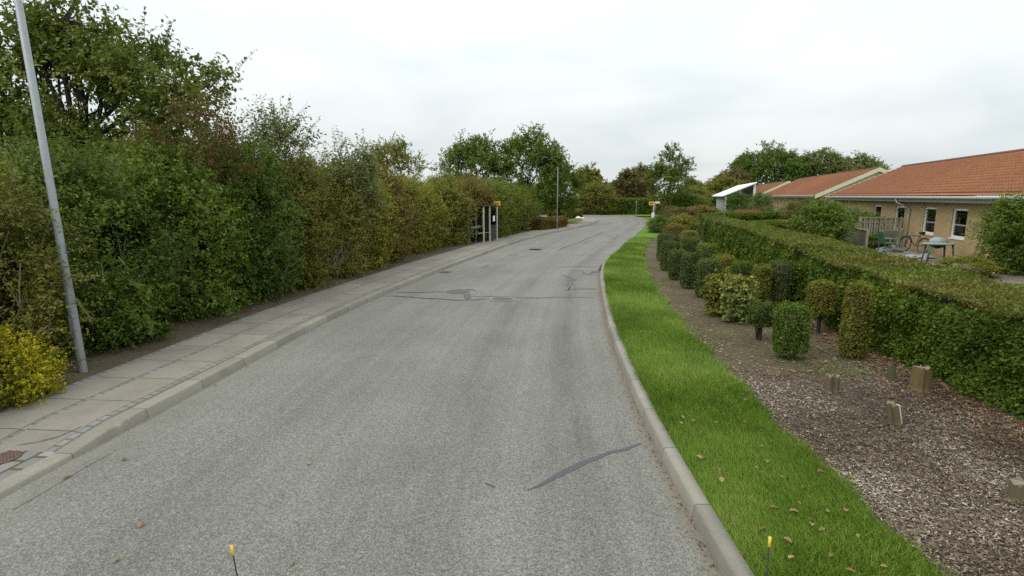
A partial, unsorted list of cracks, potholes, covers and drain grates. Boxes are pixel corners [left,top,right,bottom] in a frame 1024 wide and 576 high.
manhole cover [0,451,23,464]
